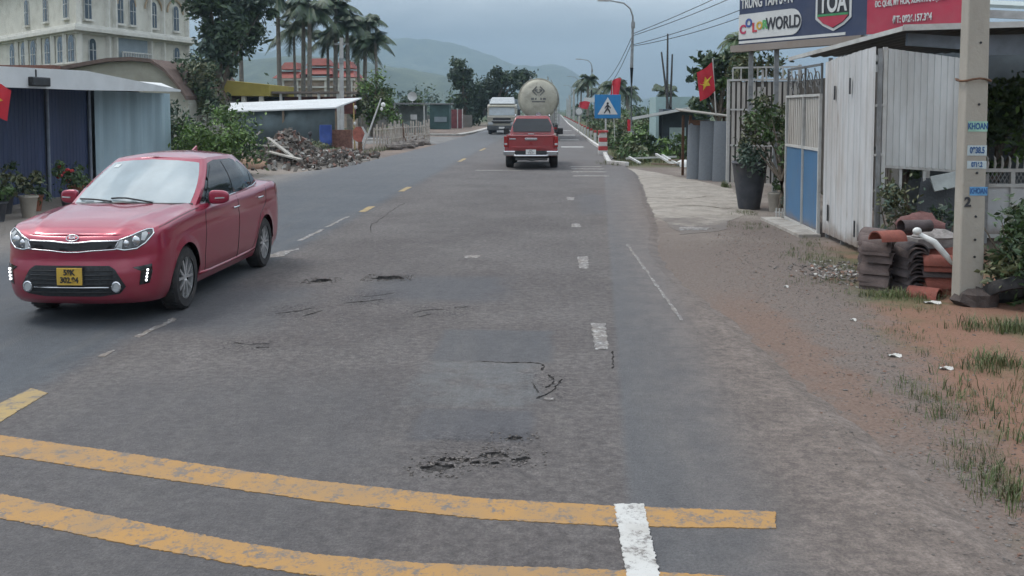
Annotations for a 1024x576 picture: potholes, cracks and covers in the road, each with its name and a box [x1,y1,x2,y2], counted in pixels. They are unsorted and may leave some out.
pothole [403,446,548,478]
crack [482,361,563,399]
pothole [487,431,539,445]
